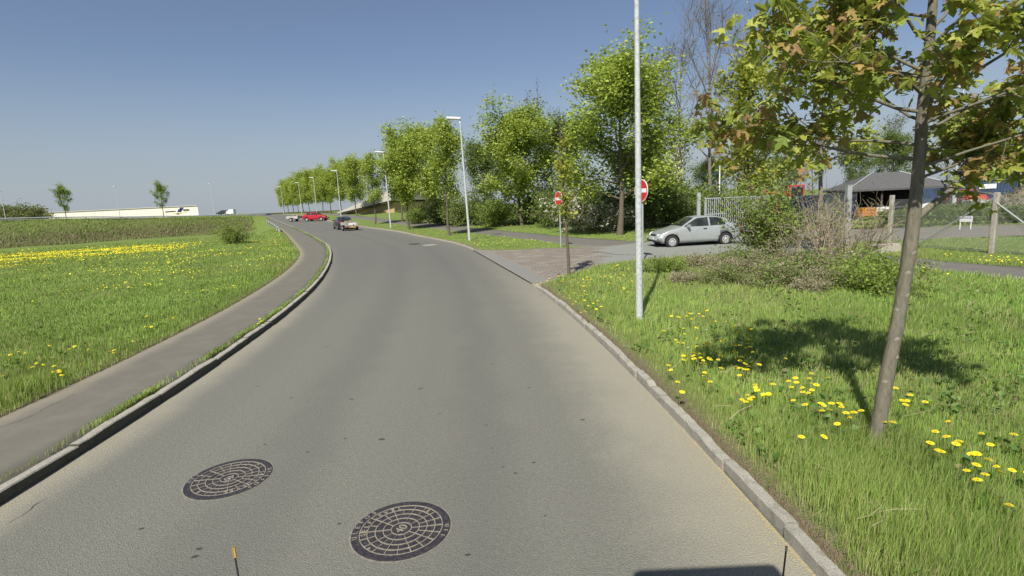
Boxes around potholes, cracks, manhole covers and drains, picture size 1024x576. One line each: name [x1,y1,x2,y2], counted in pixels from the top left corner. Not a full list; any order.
manhole cover [181,458,274,501]
manhole cover [349,501,452,563]
